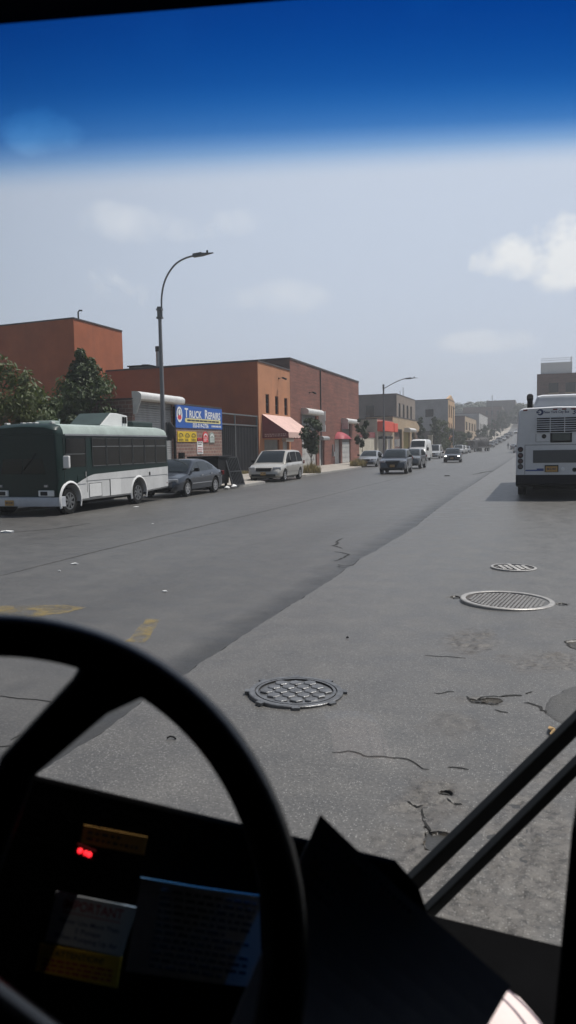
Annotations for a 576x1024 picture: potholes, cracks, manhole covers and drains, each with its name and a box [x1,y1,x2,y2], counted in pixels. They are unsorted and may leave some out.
crack [436,691,547,713]
manhole cover [245,675,347,711]
crack [342,750,429,770]
crack [408,801,444,833]
